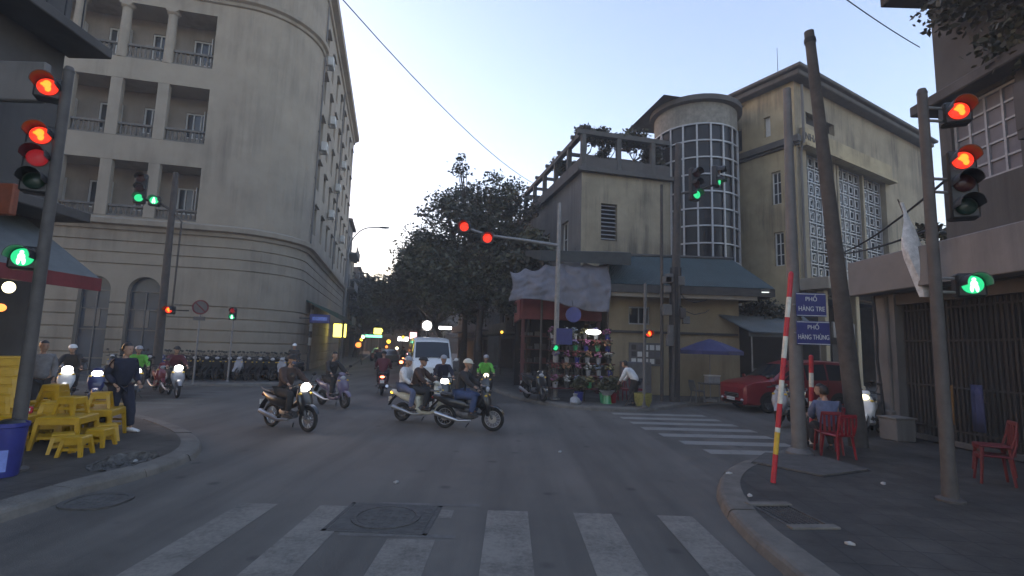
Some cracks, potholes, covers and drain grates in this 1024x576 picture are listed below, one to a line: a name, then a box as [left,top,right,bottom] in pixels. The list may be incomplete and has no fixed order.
manhole cover [56,492,135,511]
drain grate [745,501,841,530]
manhole cover [320,502,443,536]
